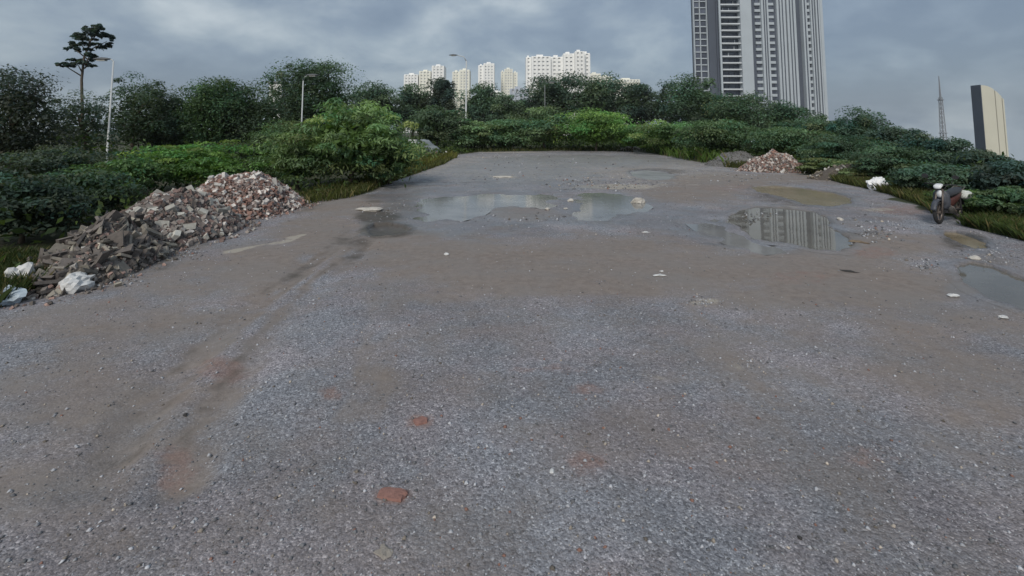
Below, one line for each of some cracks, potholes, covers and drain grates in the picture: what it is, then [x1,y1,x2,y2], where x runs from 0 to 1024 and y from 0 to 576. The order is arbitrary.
pothole [717,204,870,255]
pothole [939,258,1024,316]
